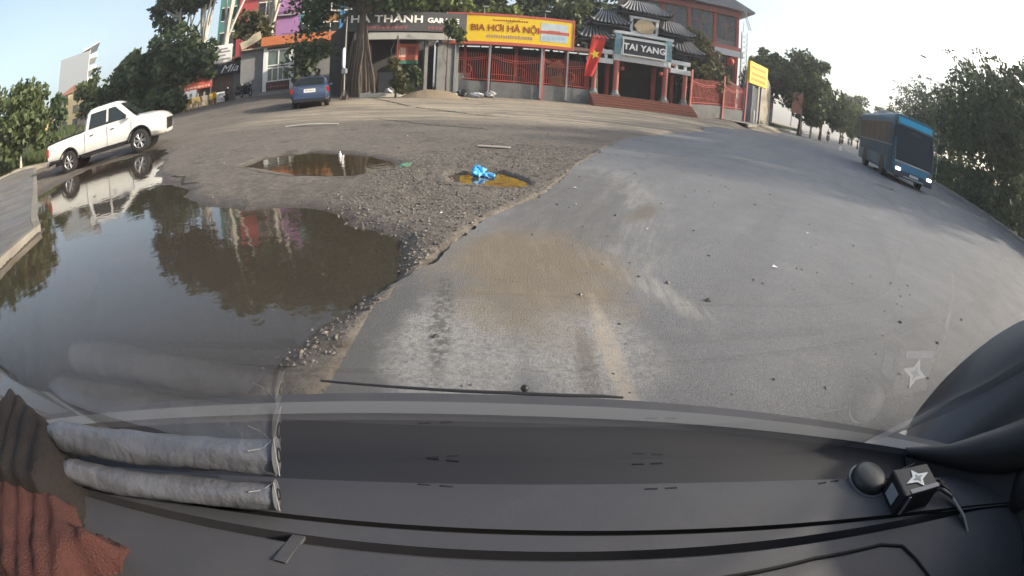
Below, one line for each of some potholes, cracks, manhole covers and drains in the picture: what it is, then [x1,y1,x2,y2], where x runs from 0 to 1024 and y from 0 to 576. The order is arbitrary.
pothole [431,166,547,188]
pothole [231,149,424,177]
